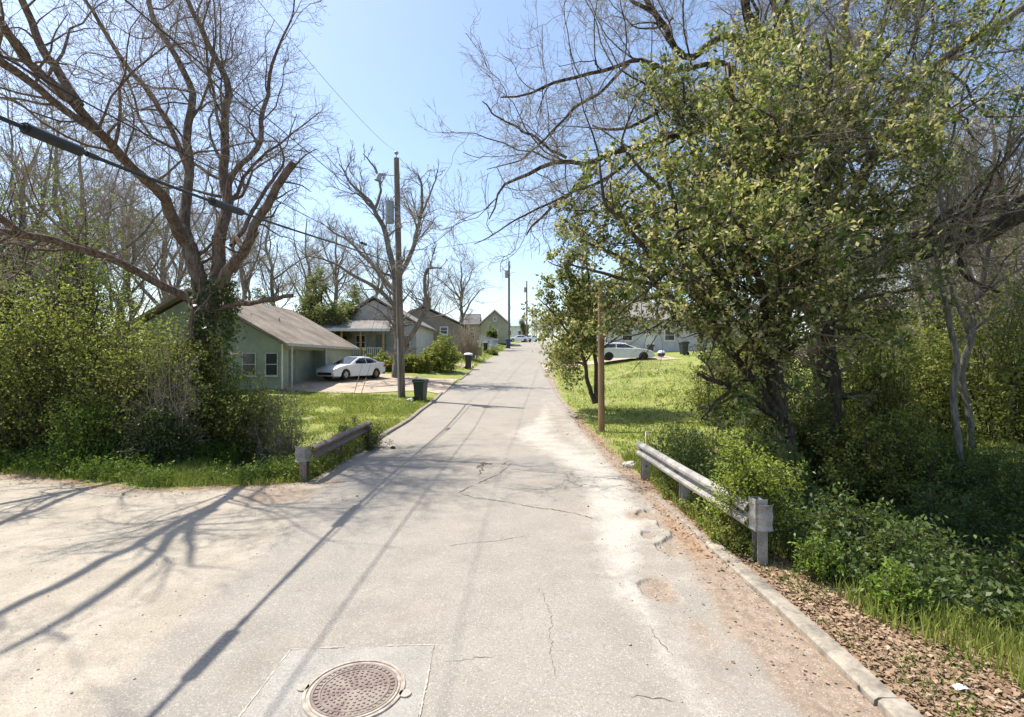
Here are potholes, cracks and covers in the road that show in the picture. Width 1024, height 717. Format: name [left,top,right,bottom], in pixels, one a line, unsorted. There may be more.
pothole [612,501,728,567]
pothole [622,570,702,609]
crack [410,460,595,519]
manhole cover [297,659,411,717]
